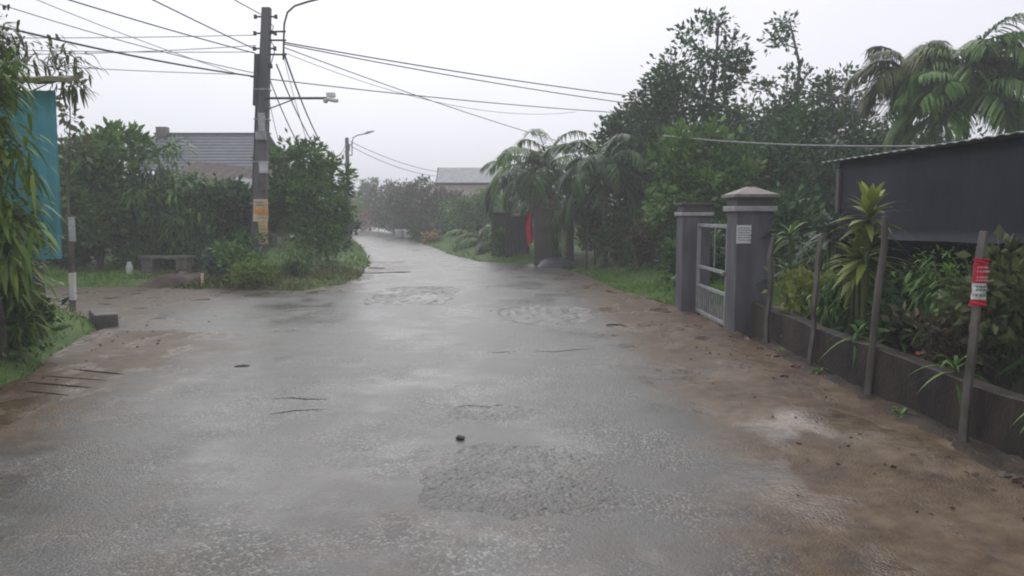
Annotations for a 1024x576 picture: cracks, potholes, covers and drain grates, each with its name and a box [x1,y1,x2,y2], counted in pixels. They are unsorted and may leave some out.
crack [25,369,126,396]
crack [269,397,324,415]
